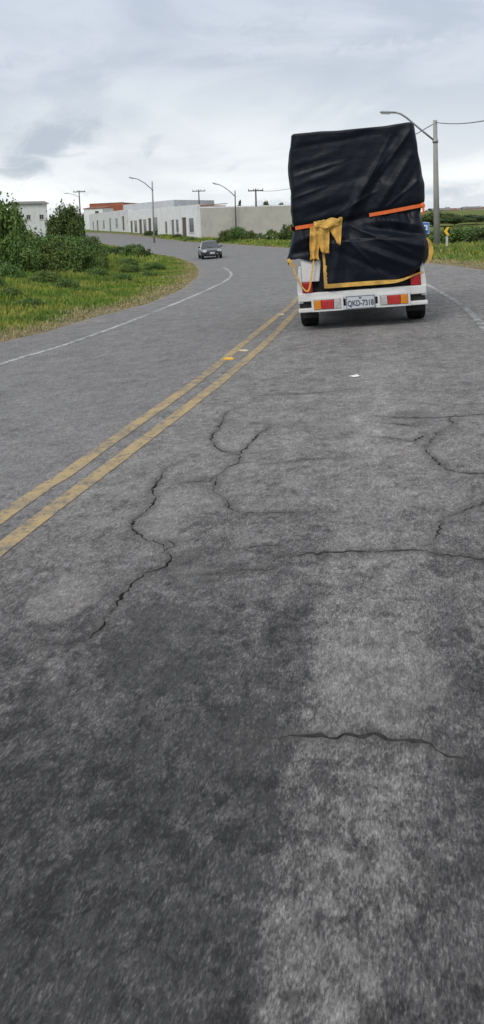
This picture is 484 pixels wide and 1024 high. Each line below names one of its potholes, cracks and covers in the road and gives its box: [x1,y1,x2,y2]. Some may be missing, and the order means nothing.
crack [383,414,483,474]
crack [272,732,464,759]
crack [182,411,299,514]
crack [208,503,484,575]
crack [43,469,175,646]
